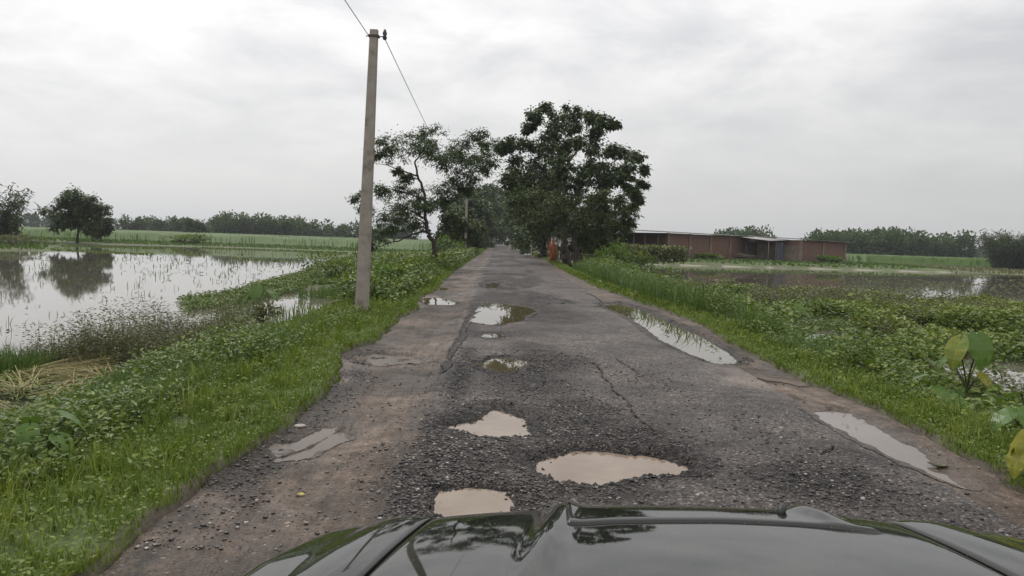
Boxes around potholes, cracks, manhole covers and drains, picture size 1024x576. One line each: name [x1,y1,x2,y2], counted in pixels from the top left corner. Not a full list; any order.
pothole [461,301,544,326]
pothole [478,280,512,289]
crack [439,307,478,375]
pothole [418,297,461,305]
pothole [599,301,743,364]
pothole [799,406,984,491]
pothole [475,355,544,374]
crack [593,359,655,431]
pothole [506,437,716,488]
pothole [425,400,553,439]
pothole [420,480,527,518]
